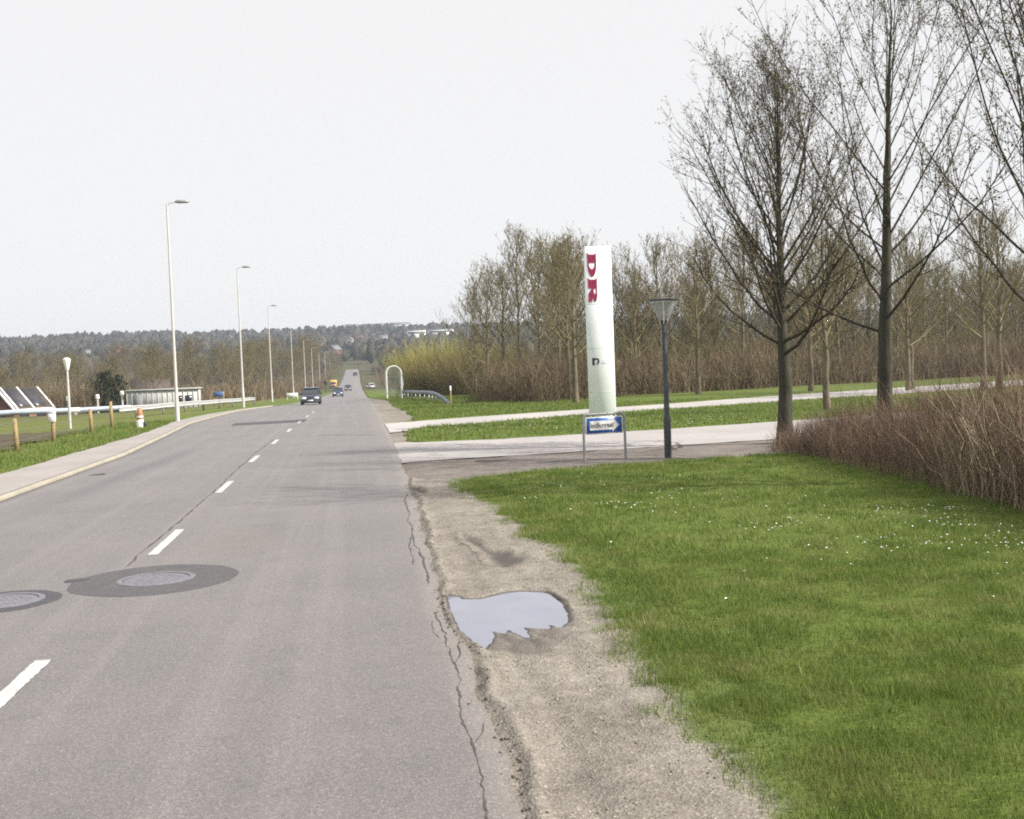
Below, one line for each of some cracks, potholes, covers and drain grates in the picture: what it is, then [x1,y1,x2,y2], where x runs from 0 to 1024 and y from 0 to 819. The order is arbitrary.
manhole cover [0,592,46,608]
pothole [440,585,578,658]
manhole cover [116,571,196,587]
crack [404,494,430,583]
crack [432,613,488,819]
